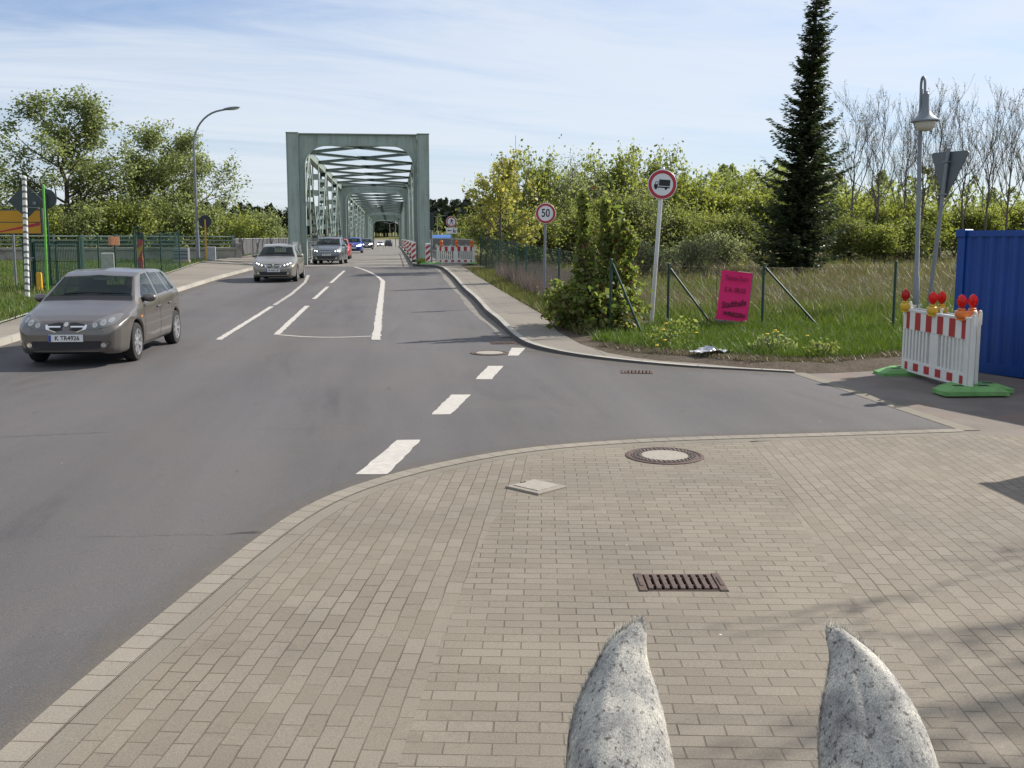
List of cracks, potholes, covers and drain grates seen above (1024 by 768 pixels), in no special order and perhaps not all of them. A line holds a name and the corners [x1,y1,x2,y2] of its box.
manhole cover [626,447,704,465]
utility cover [505,479,567,495]
drain grate [633,573,729,592]
